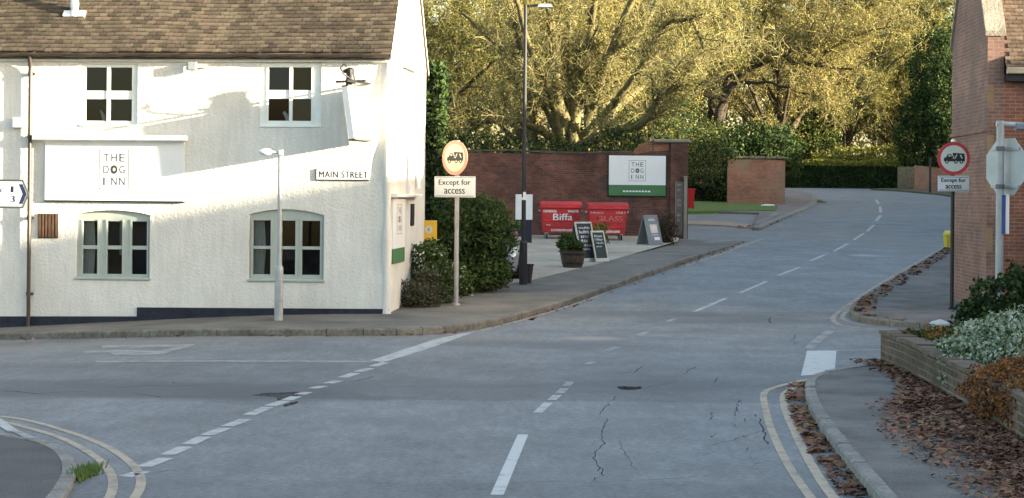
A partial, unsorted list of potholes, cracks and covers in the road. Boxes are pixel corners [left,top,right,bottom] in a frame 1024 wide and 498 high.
pothole [253,392,300,401]
crack [709,400,769,474]
crack [523,386,697,483]
